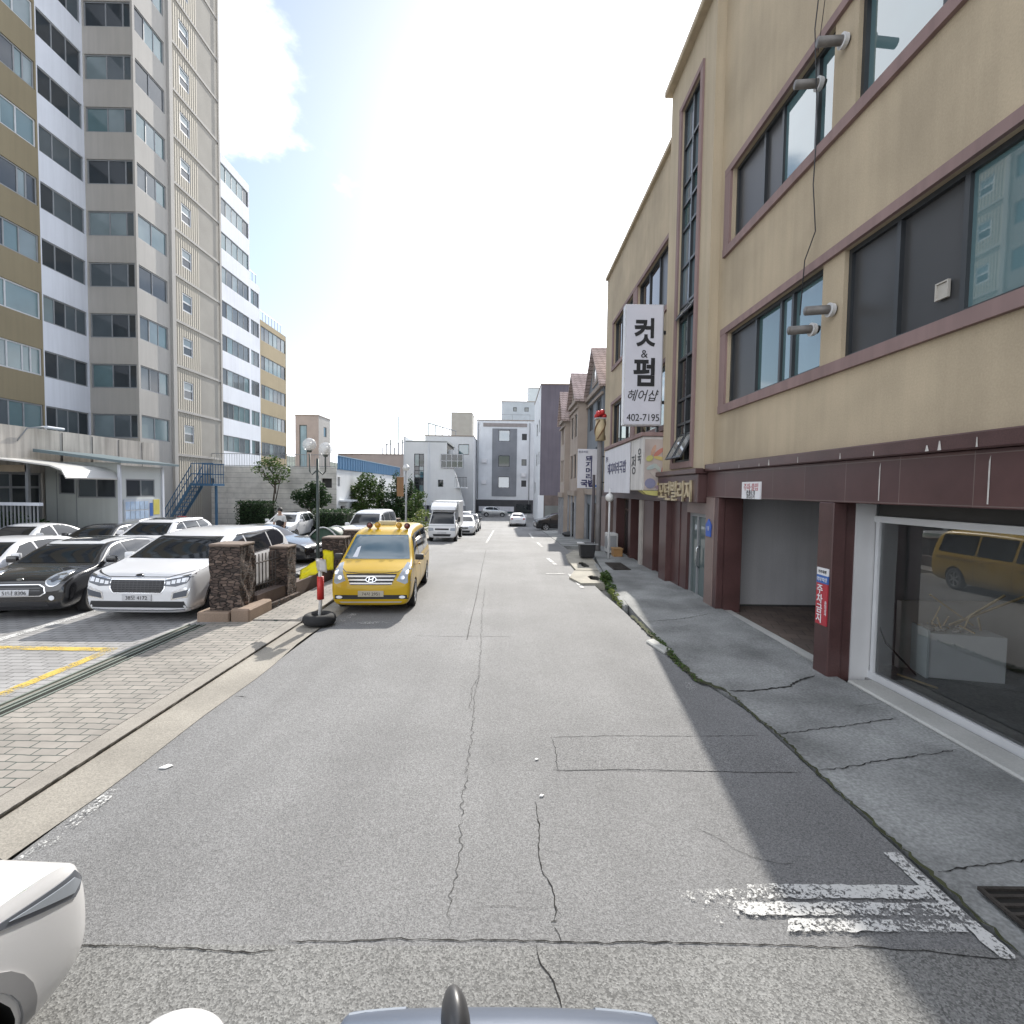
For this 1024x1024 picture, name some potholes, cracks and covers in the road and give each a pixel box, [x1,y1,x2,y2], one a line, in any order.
crack [82,614,1024,1008]
drain grate [977,886,1024,929]
